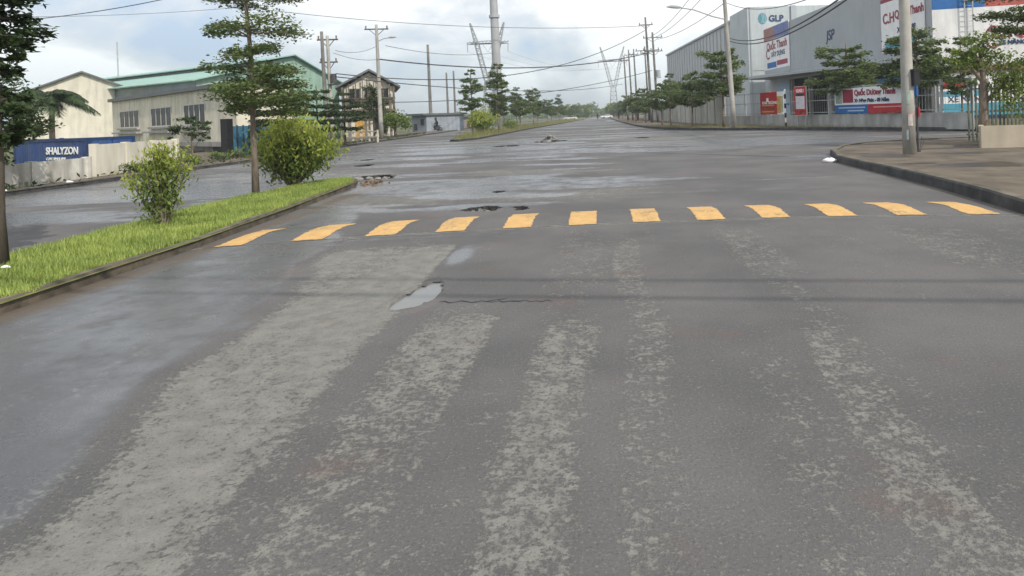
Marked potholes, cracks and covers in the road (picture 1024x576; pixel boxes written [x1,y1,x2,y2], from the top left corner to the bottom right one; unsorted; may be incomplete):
pothole [534,134,569,143]
pothole [451,205,517,213]
pothole [372,275,454,319]
